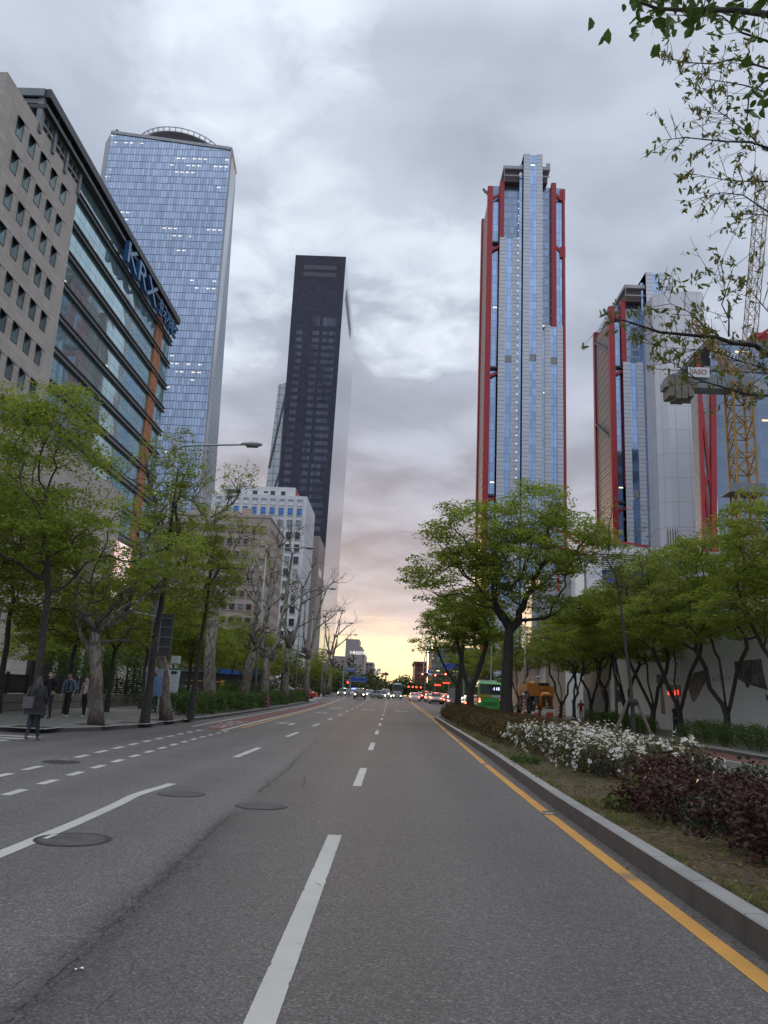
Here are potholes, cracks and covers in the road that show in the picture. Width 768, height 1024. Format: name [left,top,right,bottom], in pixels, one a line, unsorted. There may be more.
manhole cover [33,833,112,846]
manhole cover [235,802,288,810]
